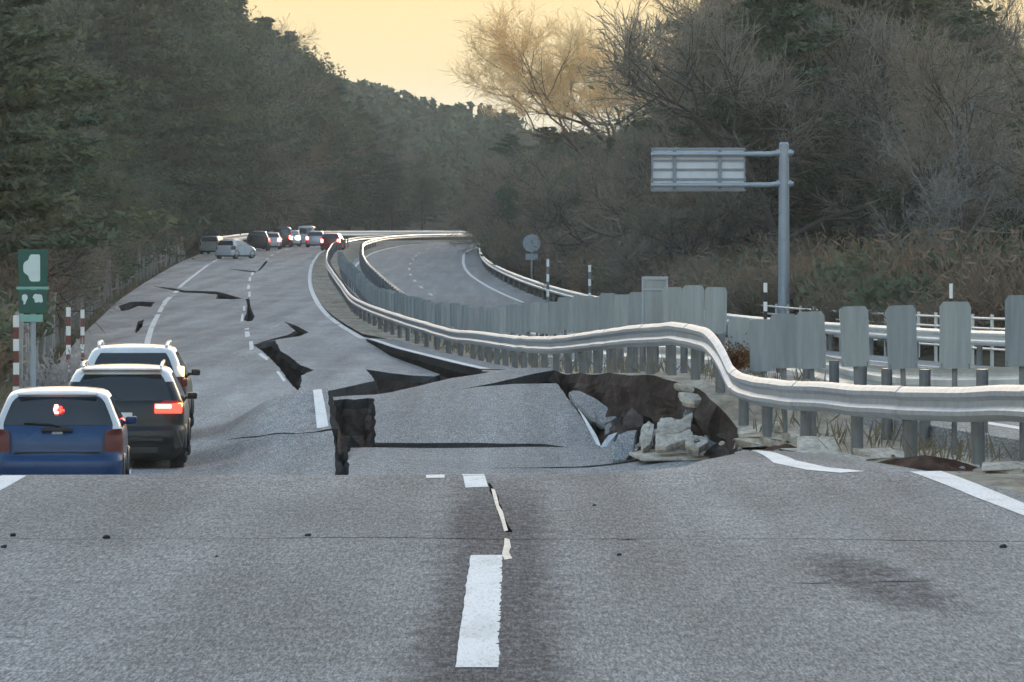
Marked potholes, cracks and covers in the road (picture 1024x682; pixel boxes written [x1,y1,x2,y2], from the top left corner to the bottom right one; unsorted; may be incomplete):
crack [155,261,640,538]
crack [135,320,144,333]
